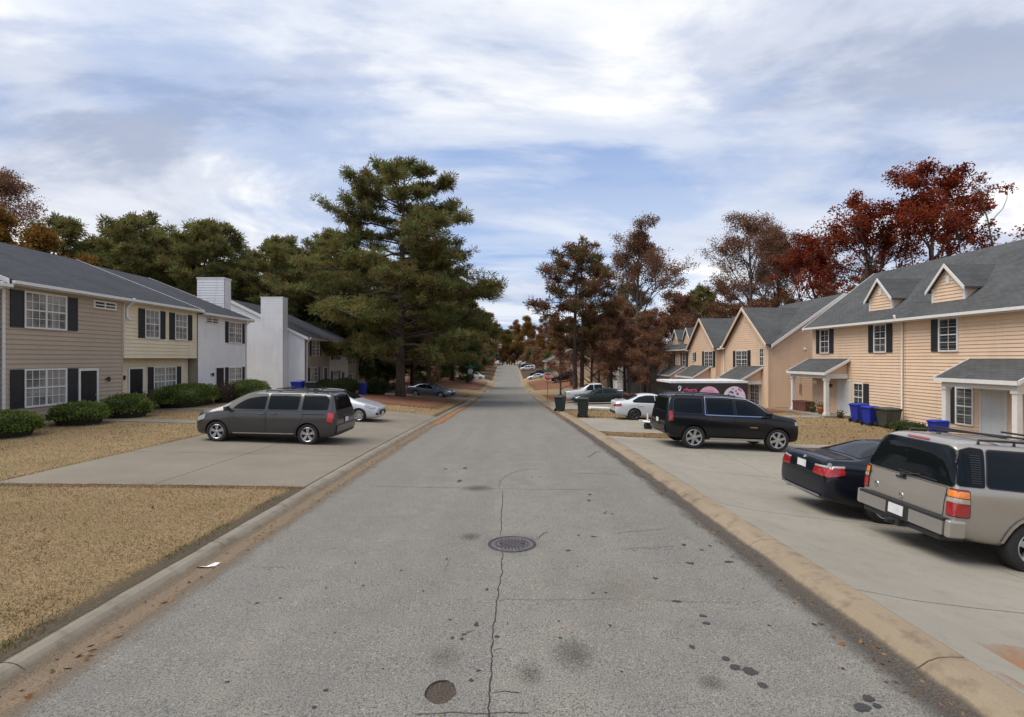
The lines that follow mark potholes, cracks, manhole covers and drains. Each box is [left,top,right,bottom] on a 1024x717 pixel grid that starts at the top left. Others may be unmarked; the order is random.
manhole cover [488,536,536,552]
crack [412,469,615,717]
